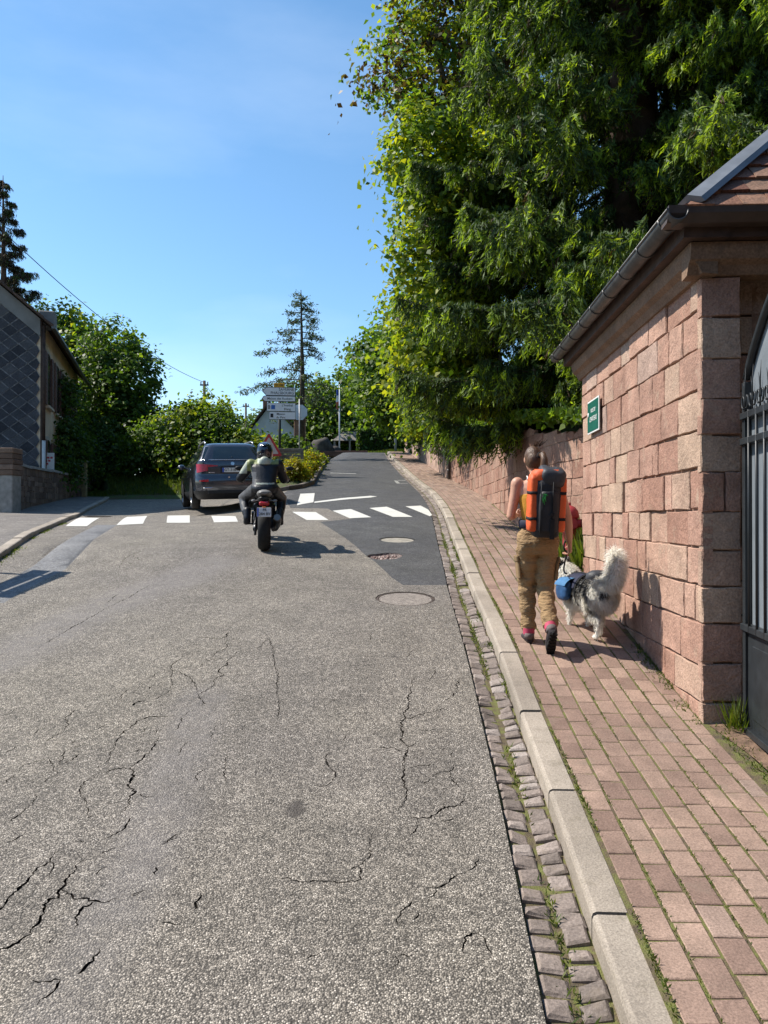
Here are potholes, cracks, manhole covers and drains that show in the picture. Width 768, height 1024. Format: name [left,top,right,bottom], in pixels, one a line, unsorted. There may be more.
crack [331,634,492,954]
crack [0,633,280,1005]
manhole cover [376,592,435,606]
crack [278,833,373,883]
